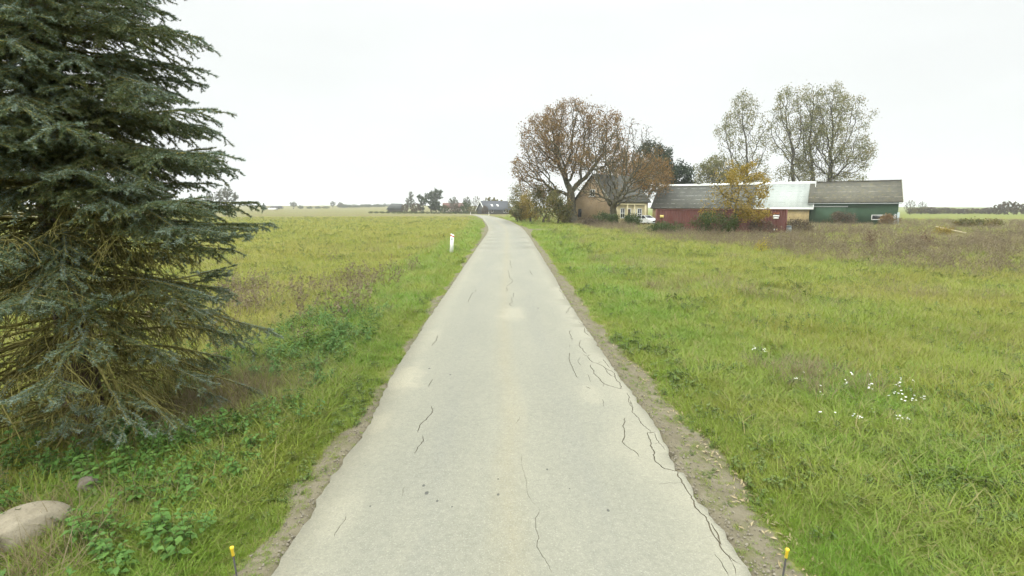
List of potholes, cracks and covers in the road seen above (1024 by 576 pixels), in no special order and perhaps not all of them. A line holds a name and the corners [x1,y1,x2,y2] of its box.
crack [561,292,737,574]
